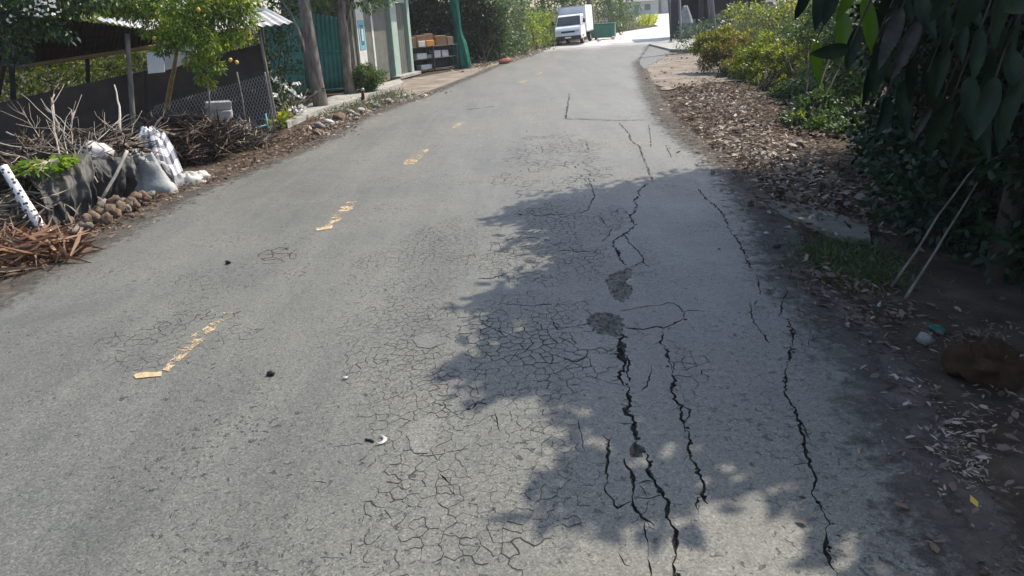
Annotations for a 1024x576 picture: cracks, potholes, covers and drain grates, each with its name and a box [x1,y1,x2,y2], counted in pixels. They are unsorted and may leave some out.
crack [336,212,591,576]
crack [458,123,714,576]
crack [698,189,842,576]
